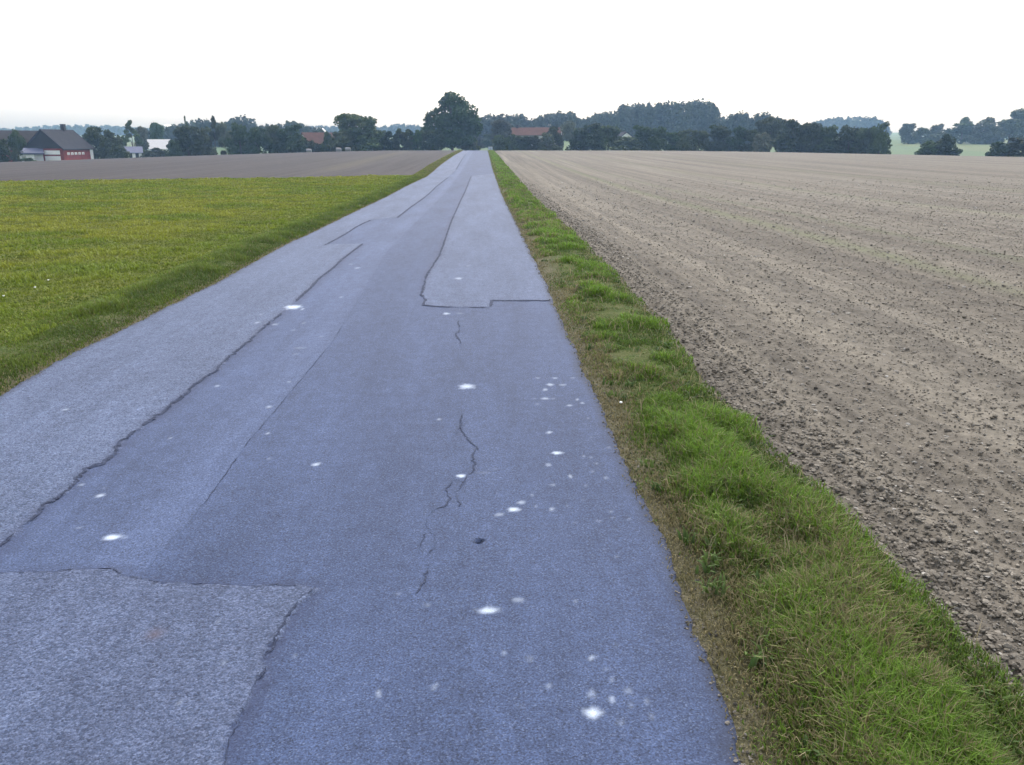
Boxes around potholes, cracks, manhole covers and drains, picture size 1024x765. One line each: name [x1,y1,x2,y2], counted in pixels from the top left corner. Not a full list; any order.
crack [0,154,547,546]
crack [409,415,479,612]
crack [1,329,340,765]
